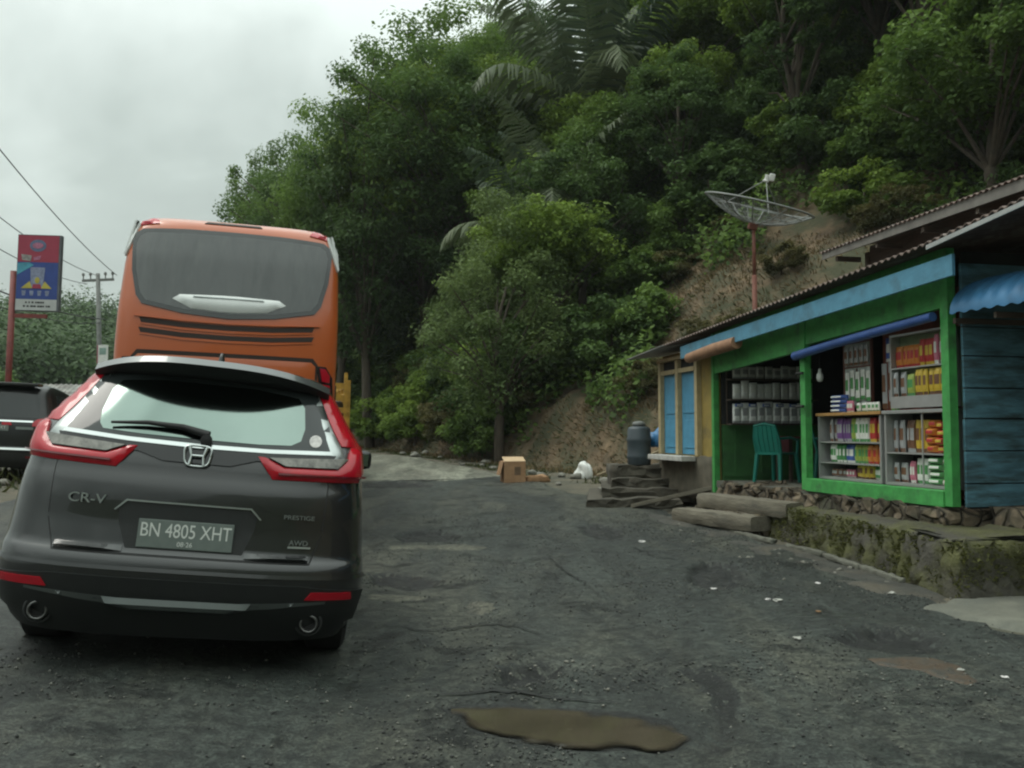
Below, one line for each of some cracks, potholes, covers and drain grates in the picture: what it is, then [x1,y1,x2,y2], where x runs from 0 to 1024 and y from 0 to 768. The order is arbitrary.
pothole [367,572,441,592]
pothole [435,703,702,755]
crack [547,554,601,596]
crack [376,623,554,633]
pothole [827,625,951,655]
crack [421,689,628,703]
